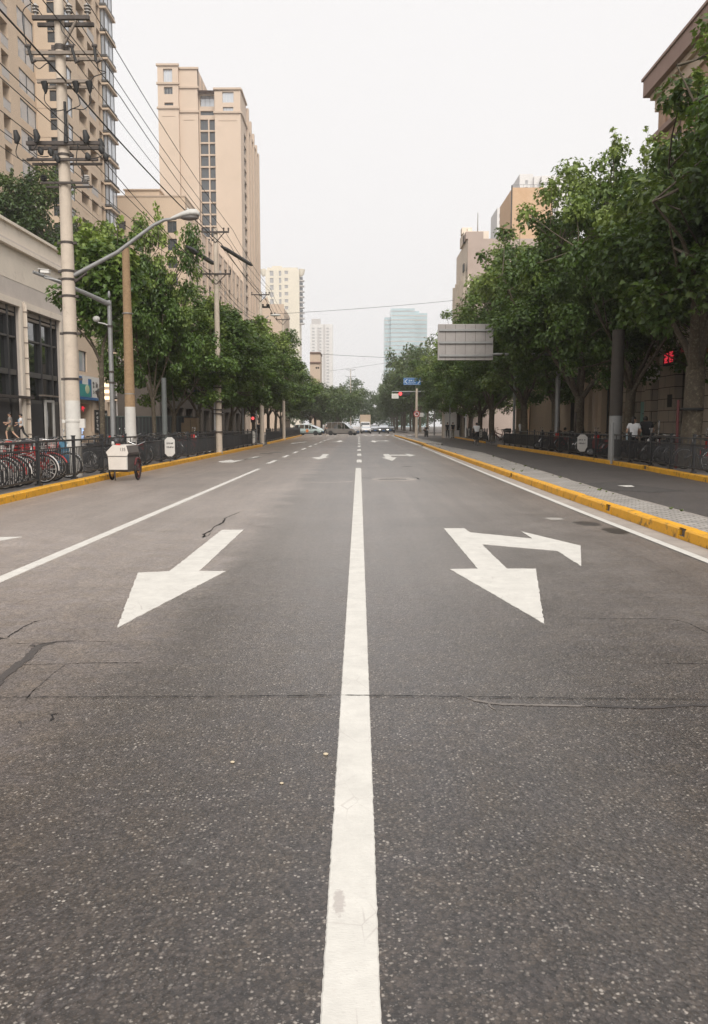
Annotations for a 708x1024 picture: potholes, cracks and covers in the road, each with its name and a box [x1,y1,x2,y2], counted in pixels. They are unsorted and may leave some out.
crack [18,662,666,727]
